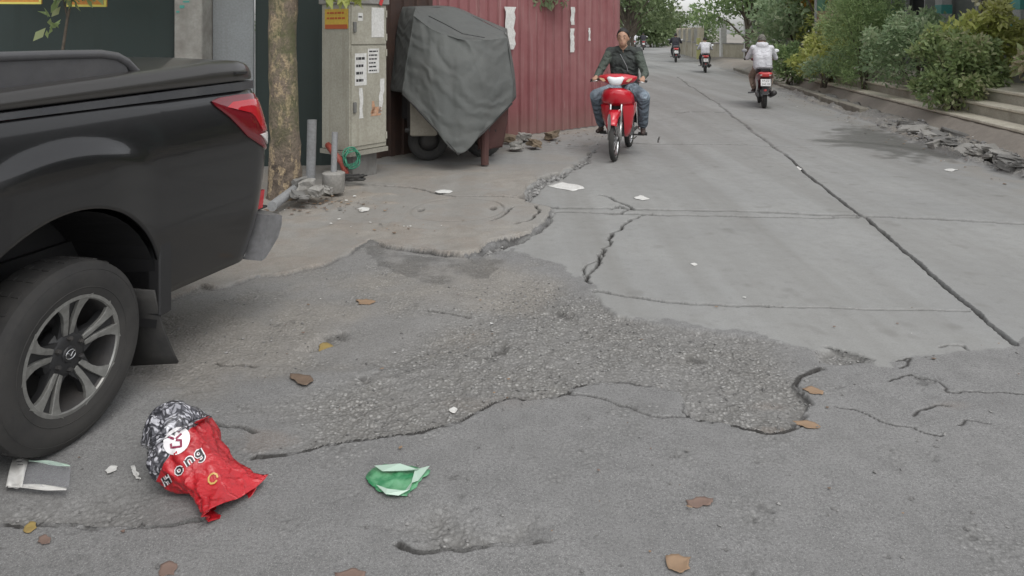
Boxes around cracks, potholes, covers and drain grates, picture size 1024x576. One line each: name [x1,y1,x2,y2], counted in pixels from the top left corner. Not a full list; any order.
crack [569,393,686,418]
crack [369,142,1024,260]
crack [832,357,1024,437]
manhole cover [410,198,505,222]
